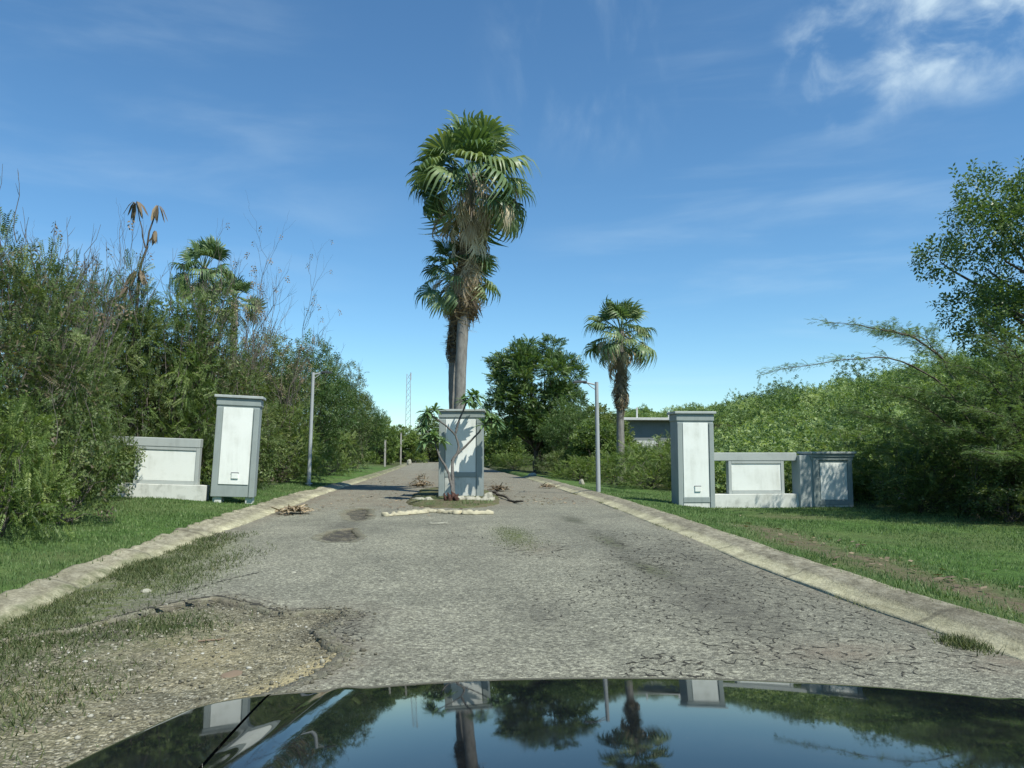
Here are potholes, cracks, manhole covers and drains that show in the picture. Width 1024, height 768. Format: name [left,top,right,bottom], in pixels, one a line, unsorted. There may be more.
pothole [0,596,360,768]
pothole [338,508,377,522]
pothole [311,528,367,543]
crack [446,530,1003,680]
